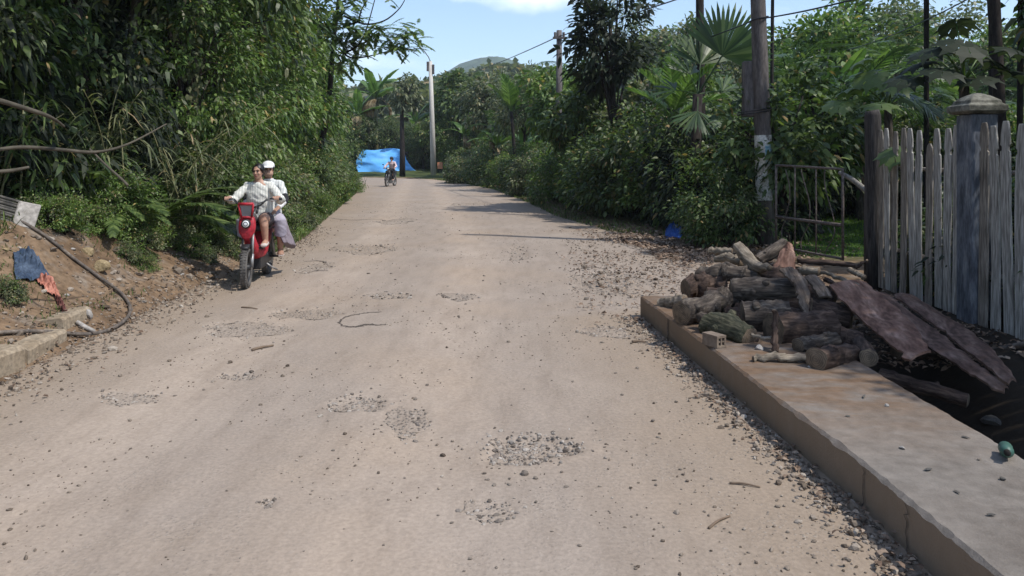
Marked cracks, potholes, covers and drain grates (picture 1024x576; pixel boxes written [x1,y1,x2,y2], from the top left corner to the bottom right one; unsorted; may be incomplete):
pothole [207,370,262,381]
pothole [374,403,432,444]
pothole [310,243,405,256]
pothole [98,389,163,407]
pothole [438,292,481,302]
pothole [450,427,626,484]
pothole [293,260,336,275]
pothole [456,497,528,525]
pothole [327,389,402,412]
pothole [362,291,412,299]
crack [338,311,386,327]
pothole [202,318,304,343]
